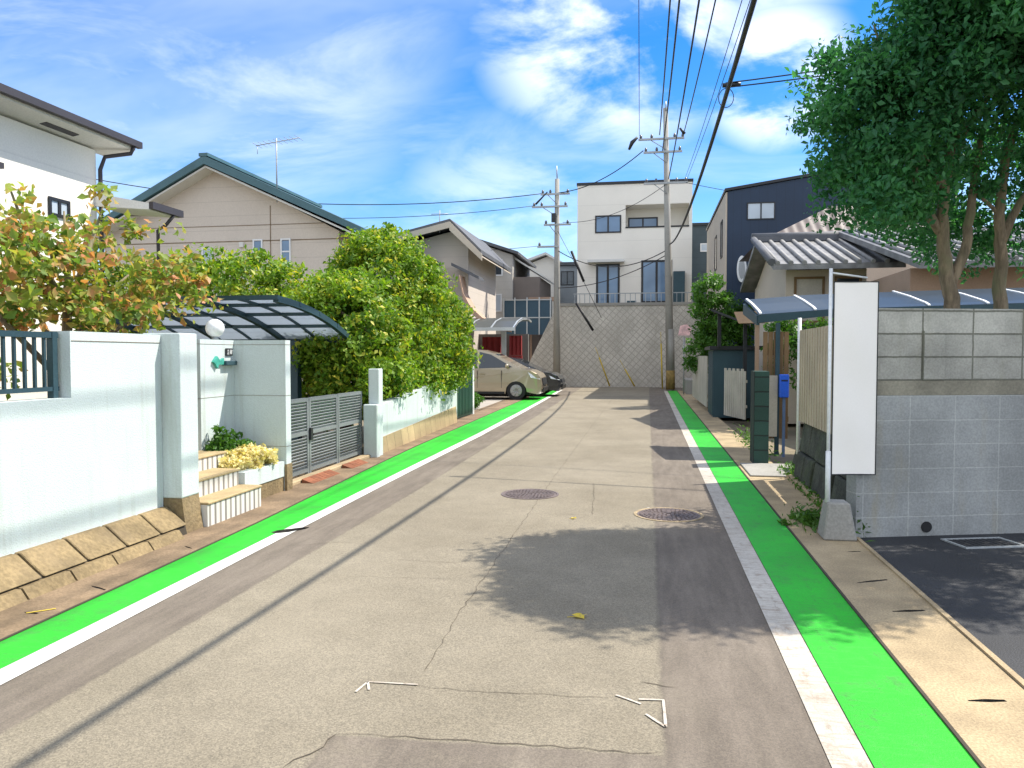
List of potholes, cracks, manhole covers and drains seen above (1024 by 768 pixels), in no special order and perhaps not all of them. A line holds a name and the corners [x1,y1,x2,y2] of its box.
crack [285,733,654,766]
manhole cover [634,507,704,522]
manhole cover [501,489,559,500]
drain grate [940,537,1024,549]
